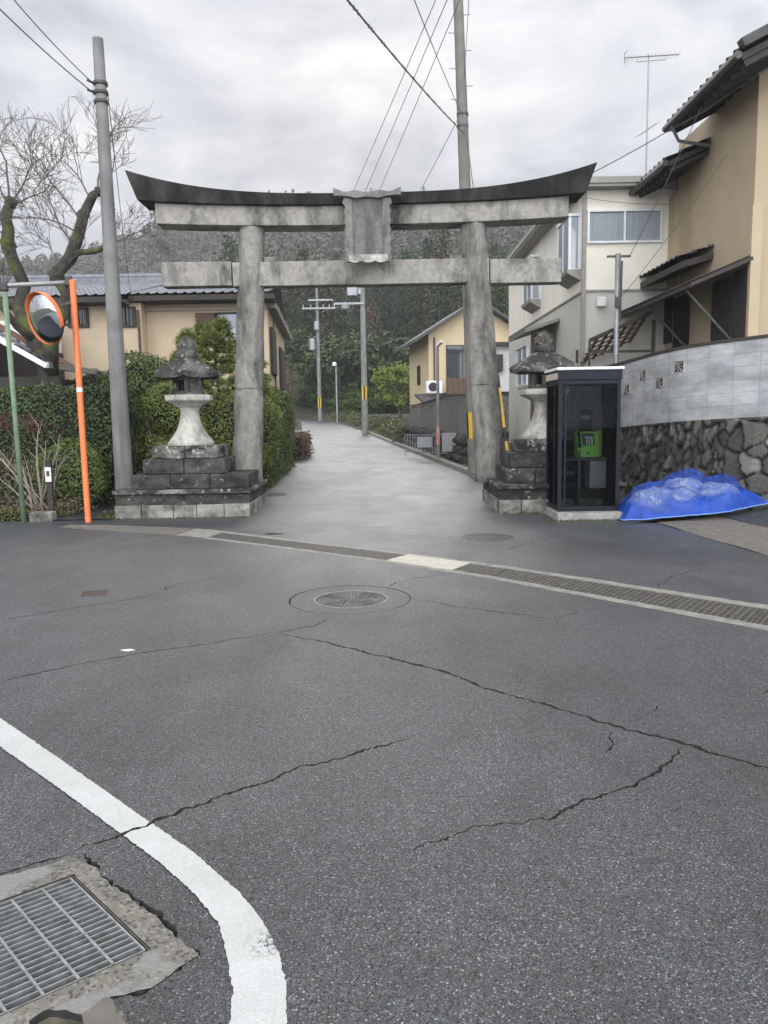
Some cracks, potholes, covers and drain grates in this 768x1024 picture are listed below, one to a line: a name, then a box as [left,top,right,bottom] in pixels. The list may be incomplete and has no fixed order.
crack [0,735,415,999]
manhole cover [460,533,515,542]
crack [1,619,768,854]
manhole cover [79,589,111,597]
manhole cover [289,586,411,614]
